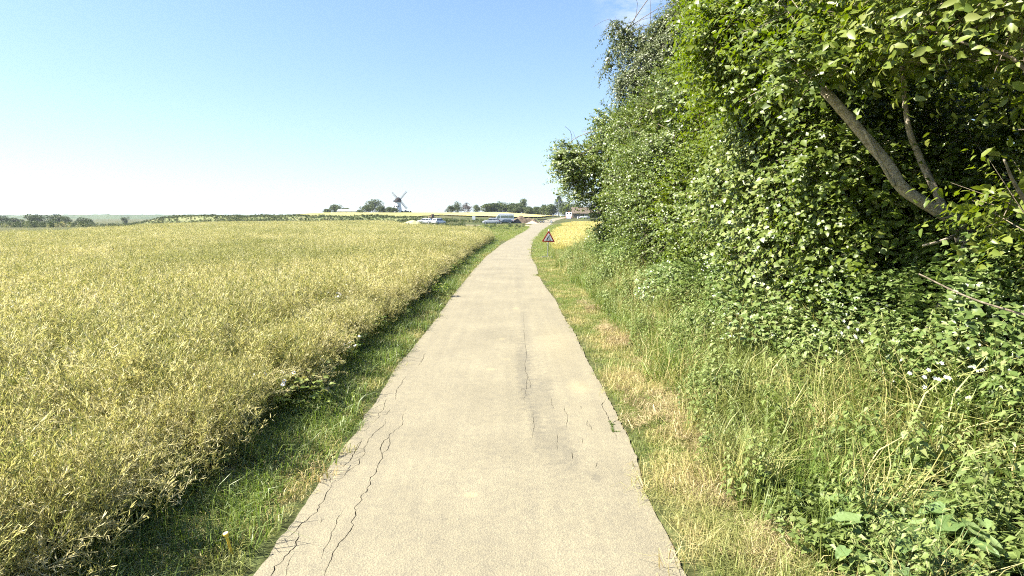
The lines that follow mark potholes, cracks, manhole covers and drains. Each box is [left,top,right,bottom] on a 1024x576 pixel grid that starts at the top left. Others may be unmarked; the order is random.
crack [551,400,620,455]
crack [271,358,424,576]
